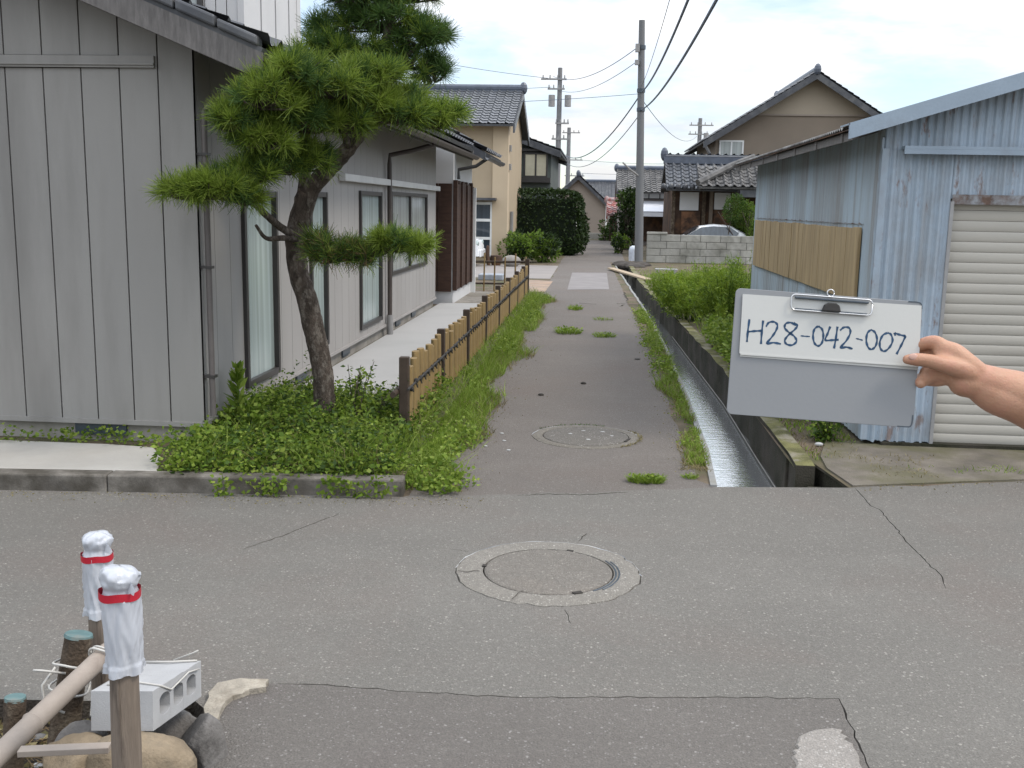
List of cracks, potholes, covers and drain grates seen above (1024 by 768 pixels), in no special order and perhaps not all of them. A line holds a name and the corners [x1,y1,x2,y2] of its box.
manhole cover [532,423,643,449]
crack [857,490,946,588]
crack [244,515,336,549]
manhole cover [455,542,641,607]
